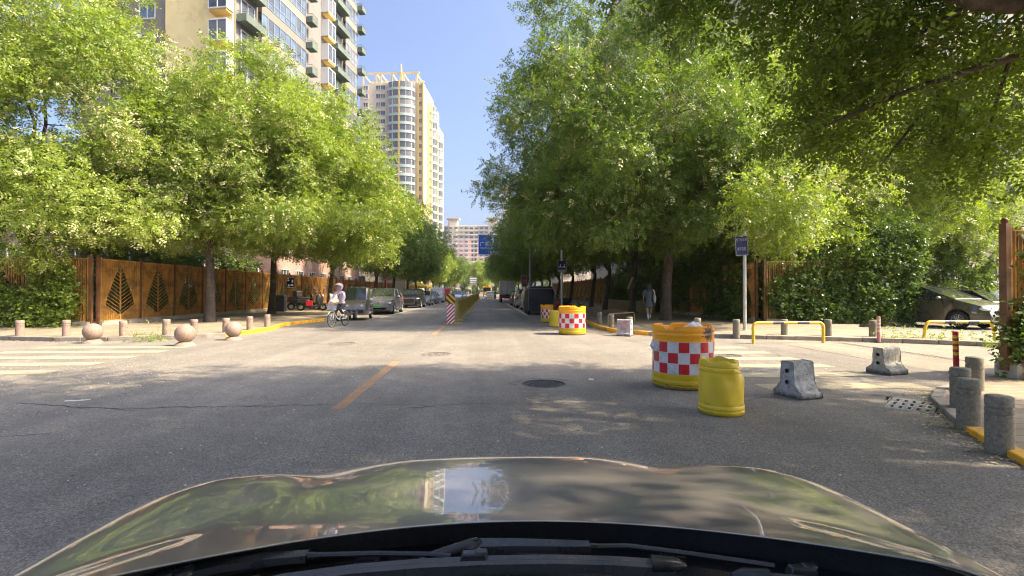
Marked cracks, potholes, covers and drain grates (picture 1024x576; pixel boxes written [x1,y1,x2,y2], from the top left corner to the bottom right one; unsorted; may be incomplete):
crack [23,403,331,411]
drain grate [880,397,939,414]
manhole cover [521,379,566,388]
